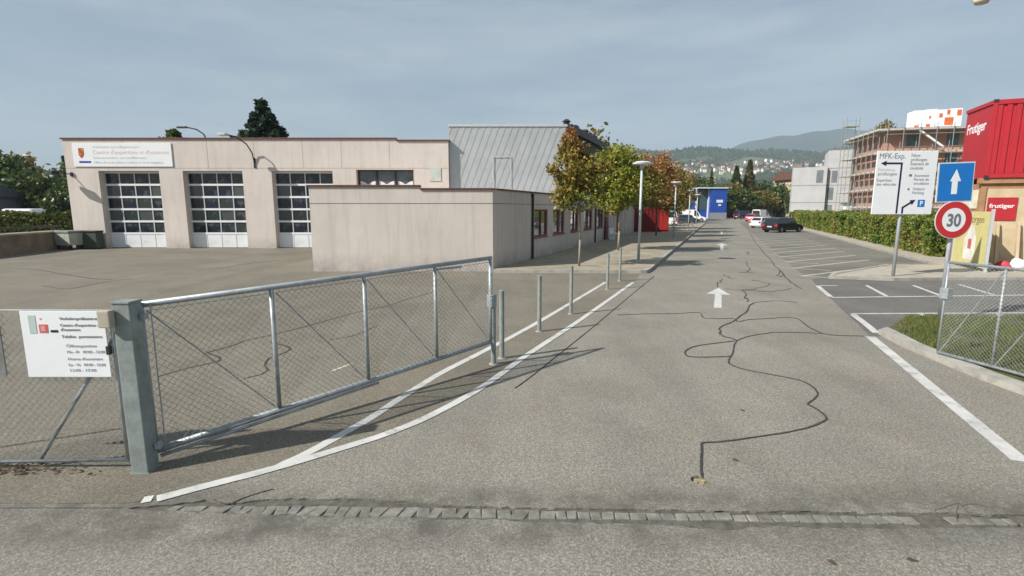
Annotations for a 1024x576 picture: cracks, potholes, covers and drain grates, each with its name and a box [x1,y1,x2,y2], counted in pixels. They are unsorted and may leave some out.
crack [934,502,1020,525]
